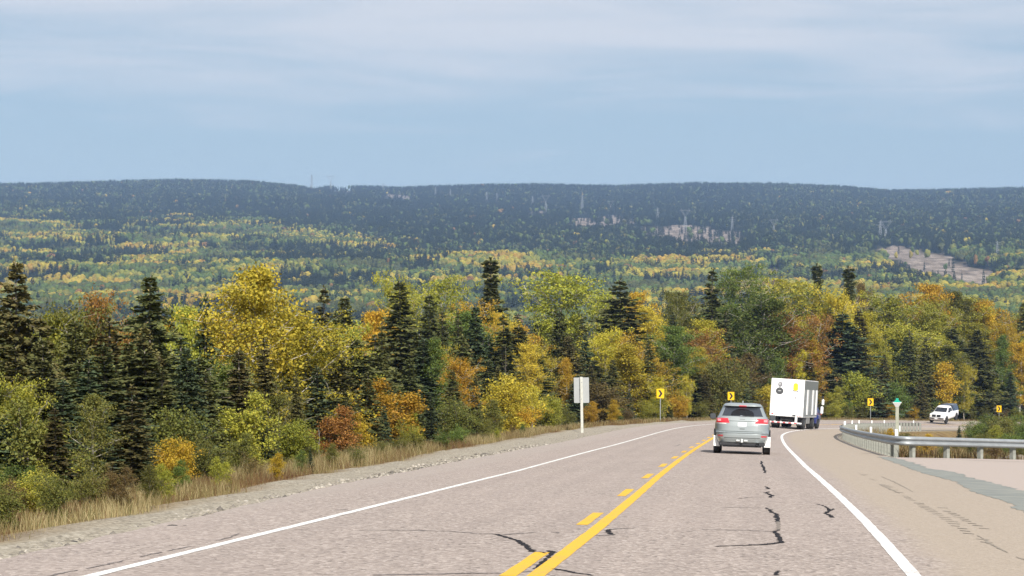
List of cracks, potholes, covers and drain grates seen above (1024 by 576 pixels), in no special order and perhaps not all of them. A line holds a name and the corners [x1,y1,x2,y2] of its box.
crack [714,461,784,546]
crack [372,530,591,575]
